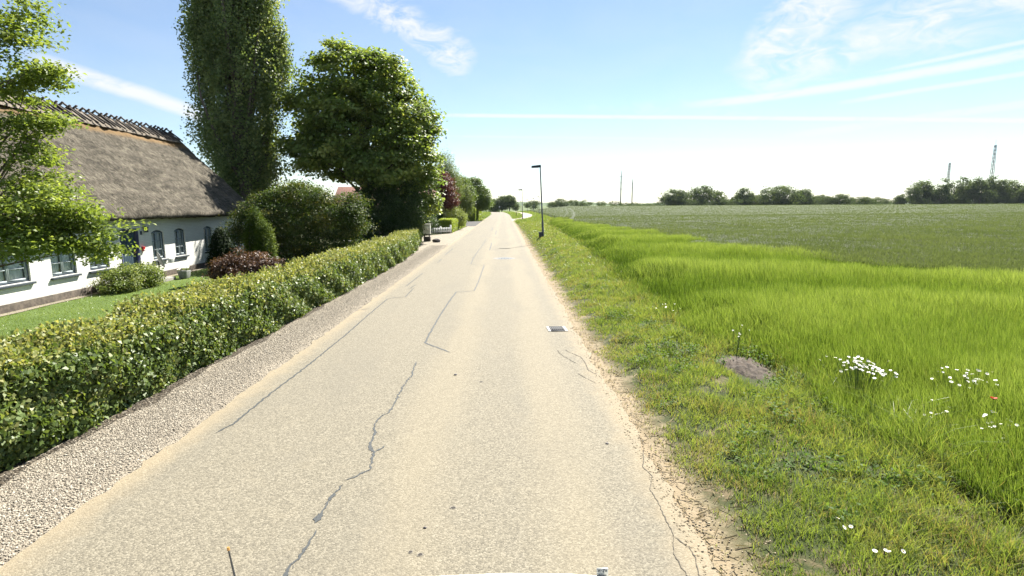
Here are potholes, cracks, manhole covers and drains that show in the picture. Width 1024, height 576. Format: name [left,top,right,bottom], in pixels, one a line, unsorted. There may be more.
crack [642,450,700,576]
